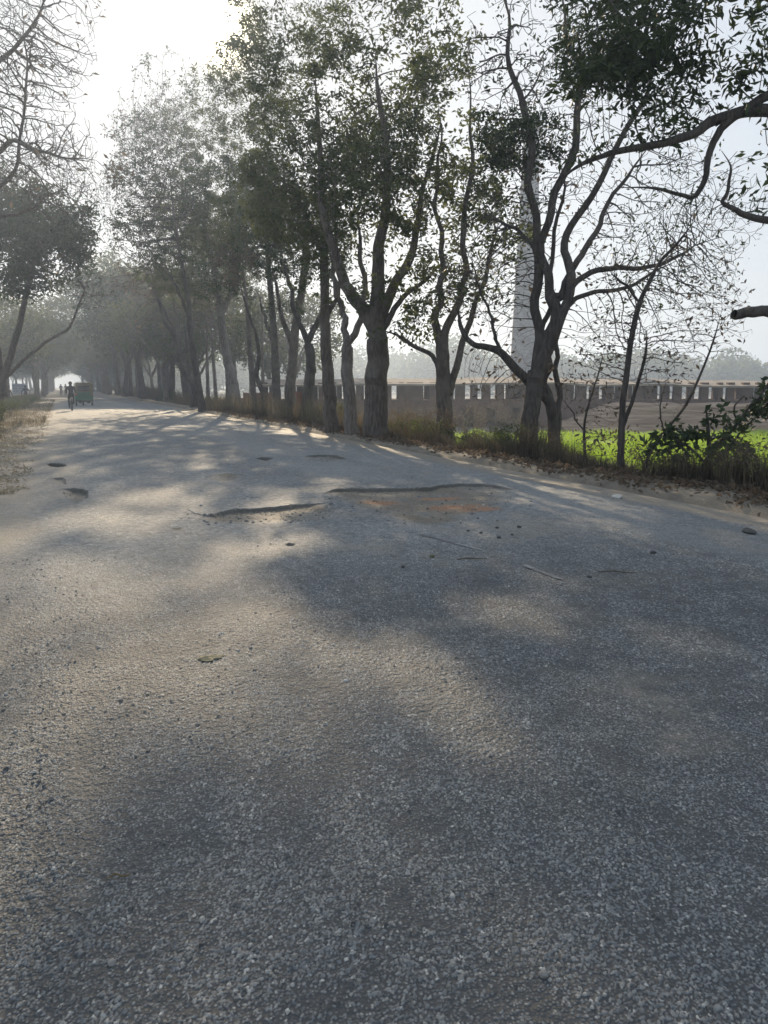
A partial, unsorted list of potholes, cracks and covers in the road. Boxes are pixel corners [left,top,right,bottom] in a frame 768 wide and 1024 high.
pothole [302,454,347,462]
pothole [187,501,346,525]
pothole [58,488,89,505]
